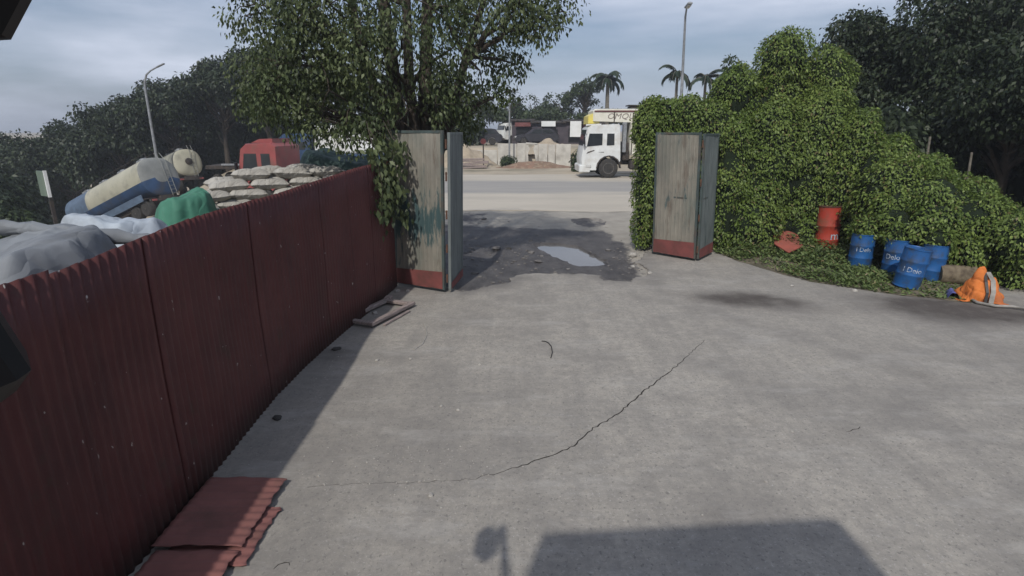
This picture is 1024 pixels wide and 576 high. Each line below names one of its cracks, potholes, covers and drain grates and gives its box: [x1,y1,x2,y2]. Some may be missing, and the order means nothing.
crack [311,341,704,487]
